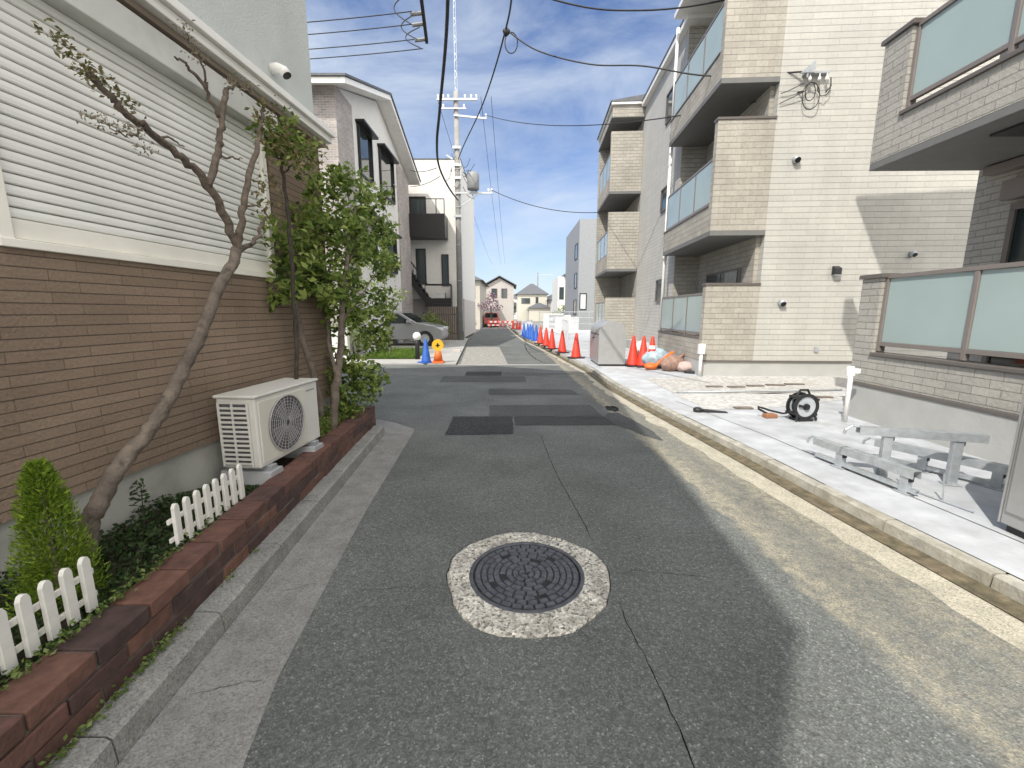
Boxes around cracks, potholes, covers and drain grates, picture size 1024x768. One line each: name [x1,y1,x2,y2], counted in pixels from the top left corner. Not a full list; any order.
crack [541,436,590,536]
manhole cover [447,532,610,639]
crack [619,602,695,768]
